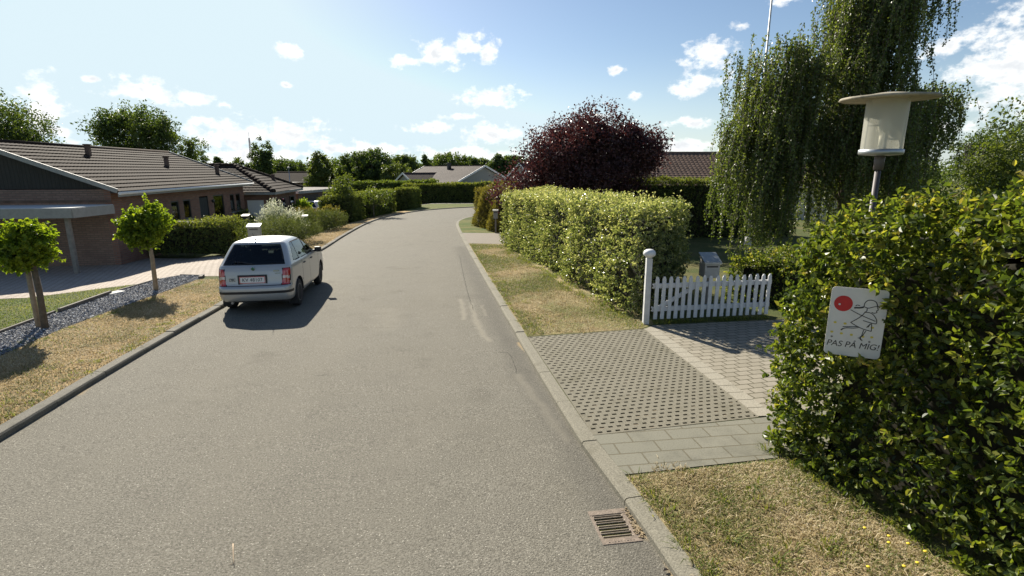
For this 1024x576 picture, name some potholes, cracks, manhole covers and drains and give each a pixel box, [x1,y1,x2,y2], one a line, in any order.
drain grate [588,508,643,545]
